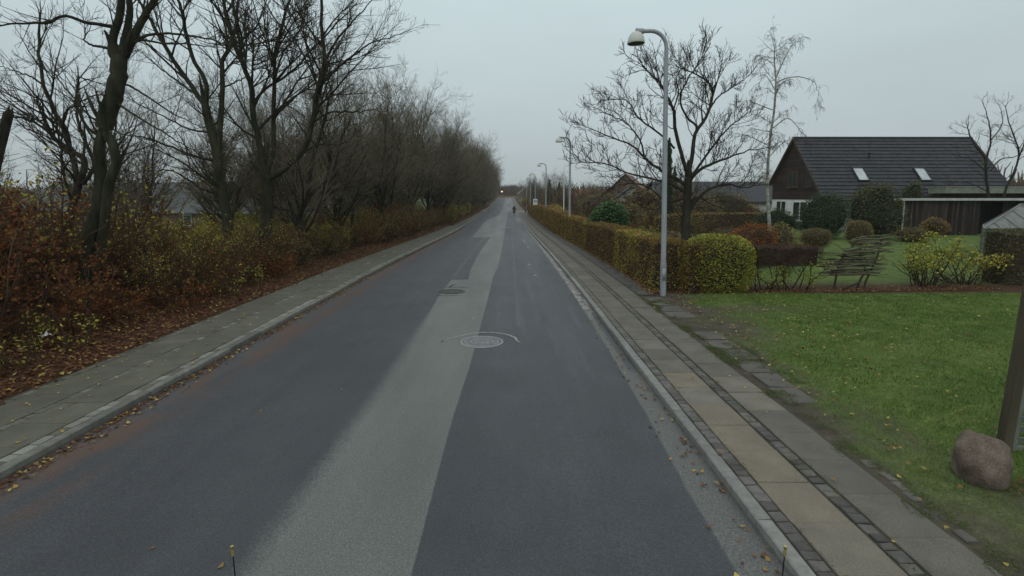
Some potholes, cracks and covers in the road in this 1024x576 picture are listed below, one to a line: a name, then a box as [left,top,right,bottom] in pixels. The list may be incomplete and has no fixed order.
manhole cover [460,336,503,348]
